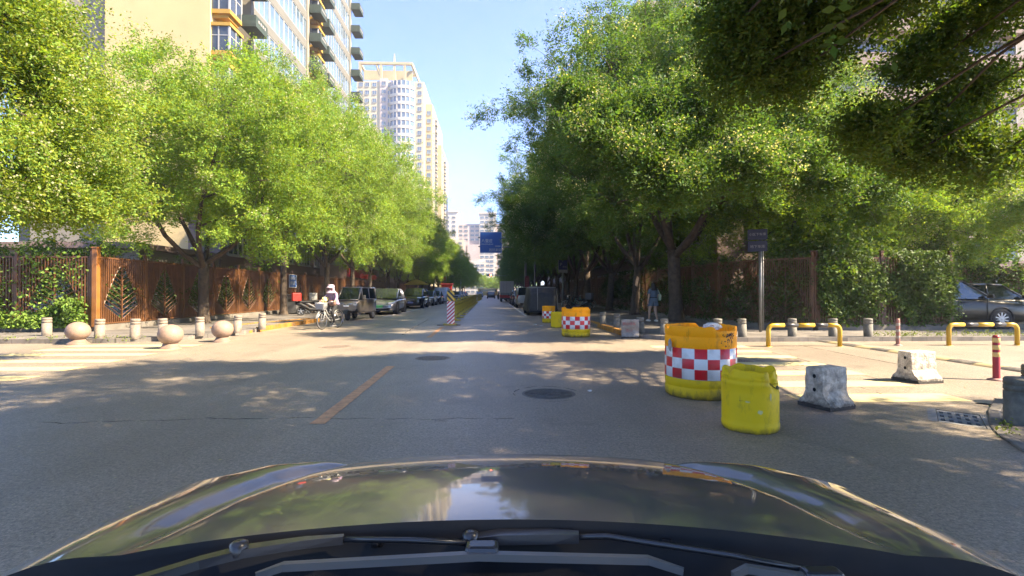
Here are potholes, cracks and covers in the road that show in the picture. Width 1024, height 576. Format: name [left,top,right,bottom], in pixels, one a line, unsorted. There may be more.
drain grate [927,408,993,430]
manhole cover [522,388,576,399]
